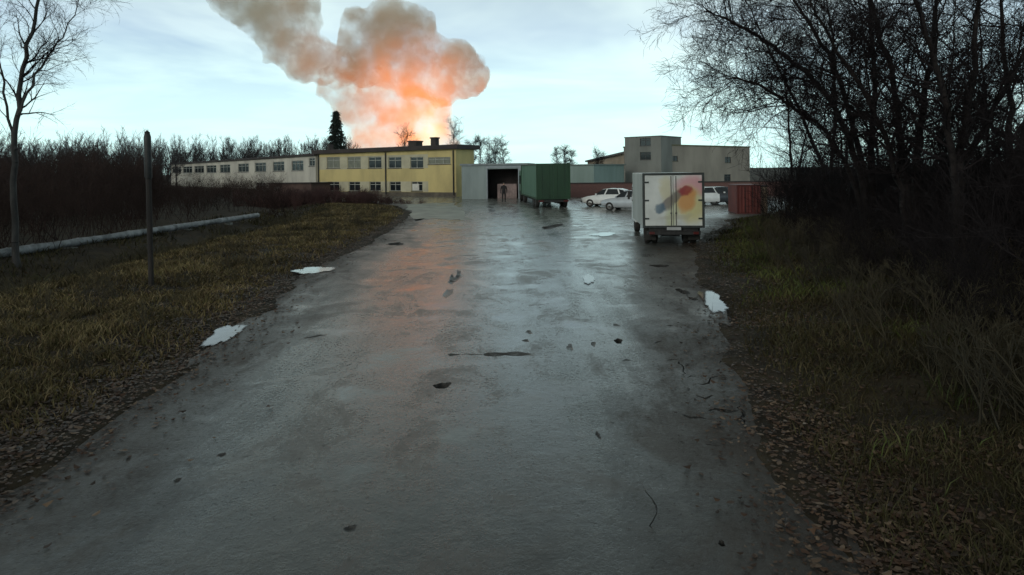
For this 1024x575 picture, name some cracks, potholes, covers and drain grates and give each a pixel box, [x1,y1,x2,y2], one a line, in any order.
crack [640,481,659,535]
